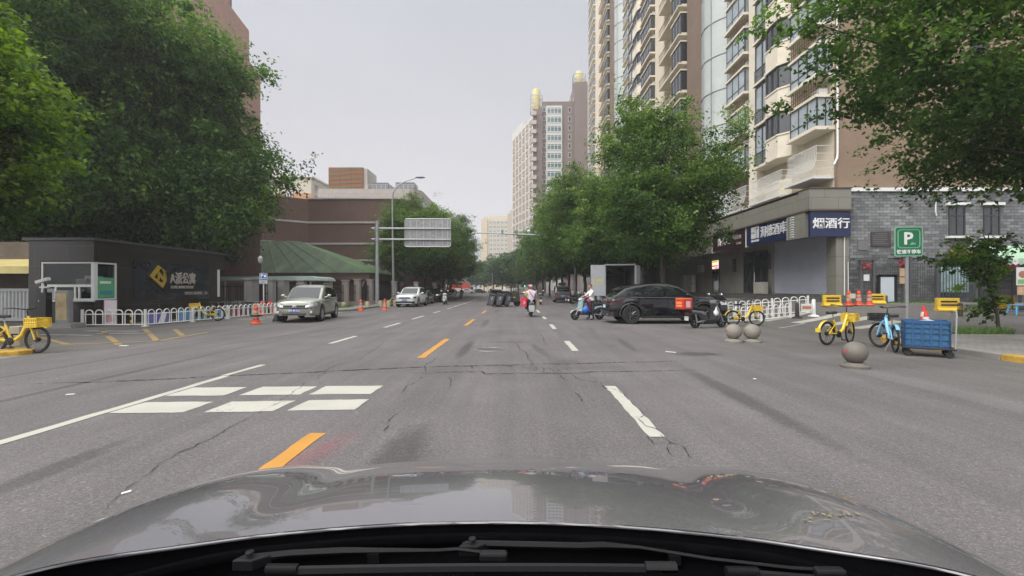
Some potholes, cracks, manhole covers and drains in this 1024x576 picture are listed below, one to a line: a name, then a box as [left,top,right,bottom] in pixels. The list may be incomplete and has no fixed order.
crack [10,335,690,533]
